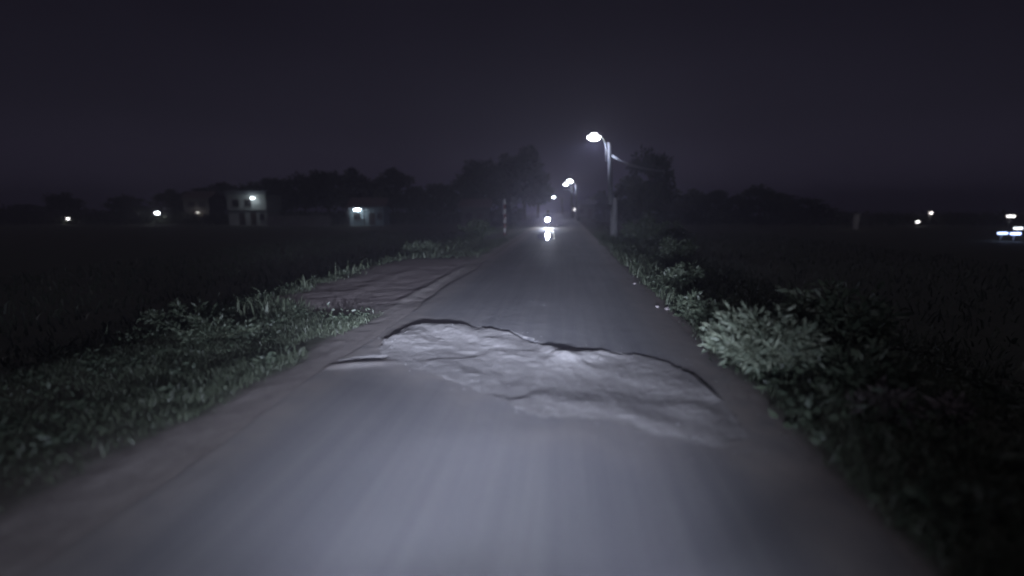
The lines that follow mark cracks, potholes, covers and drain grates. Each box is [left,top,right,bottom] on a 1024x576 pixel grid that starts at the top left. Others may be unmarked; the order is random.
pothole [377,323,752,447]
pothole [336,353,387,364]
